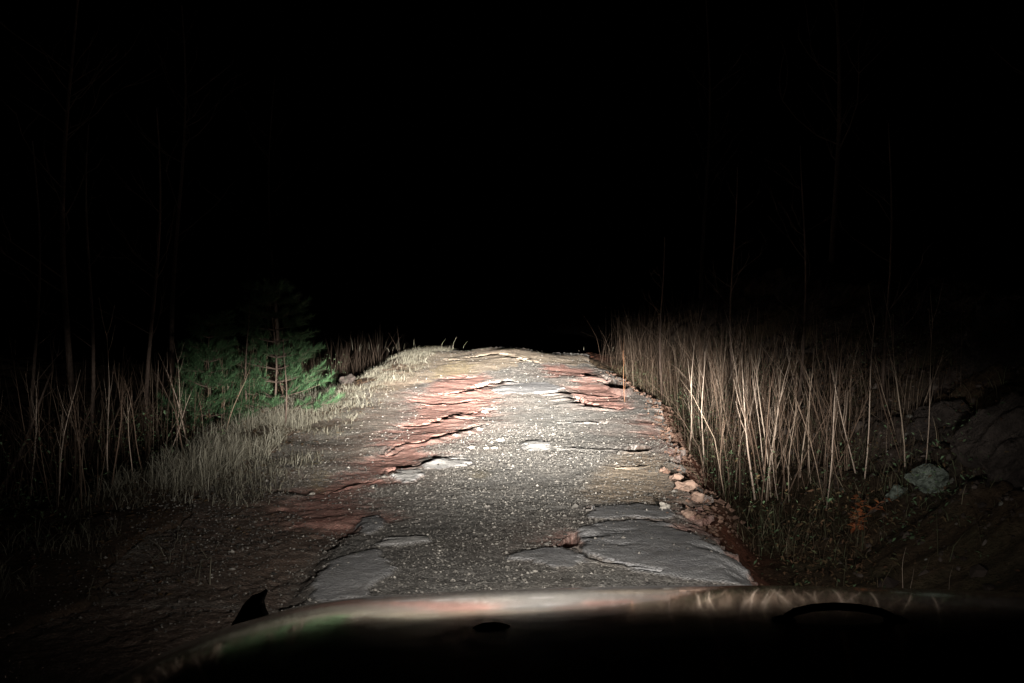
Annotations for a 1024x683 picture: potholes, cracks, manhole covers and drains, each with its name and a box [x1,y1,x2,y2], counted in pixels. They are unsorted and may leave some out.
pothole [599,376,634,397]
crack [448,352,536,363]
crack [325,374,630,494]
